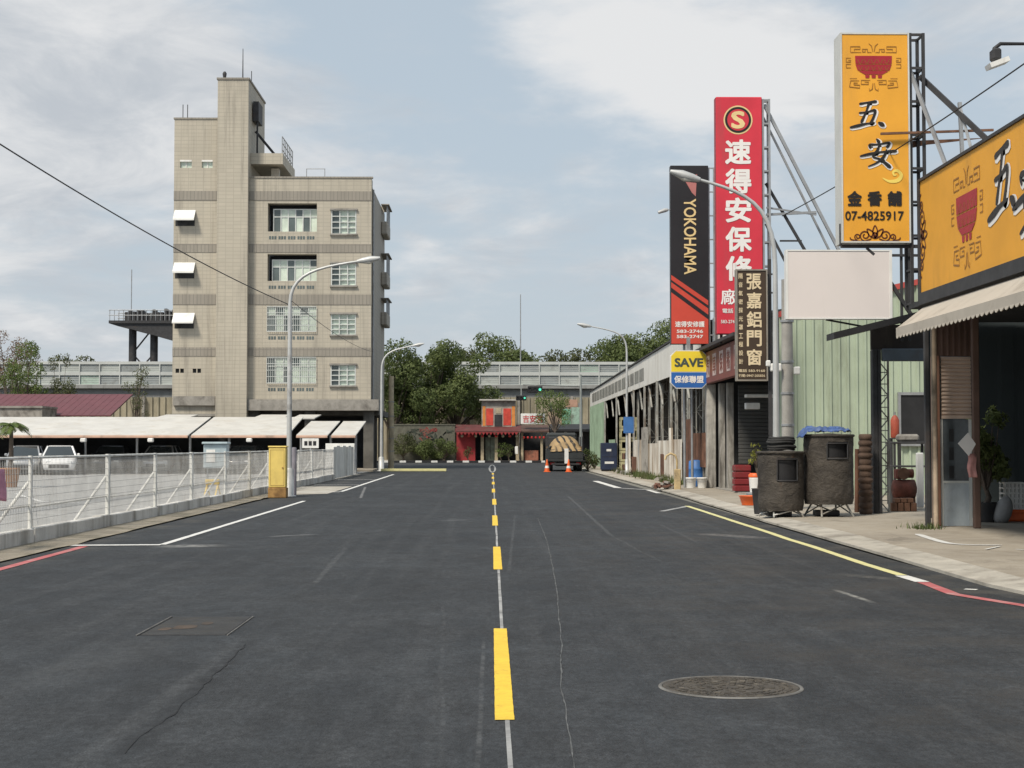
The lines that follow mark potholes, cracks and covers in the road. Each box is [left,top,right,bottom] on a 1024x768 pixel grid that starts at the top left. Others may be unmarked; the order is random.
manhole cover [136,616,254,636]
crack [538,519,575,768]
manhole cover [658,676,804,699]
crack [125,643,246,753]
